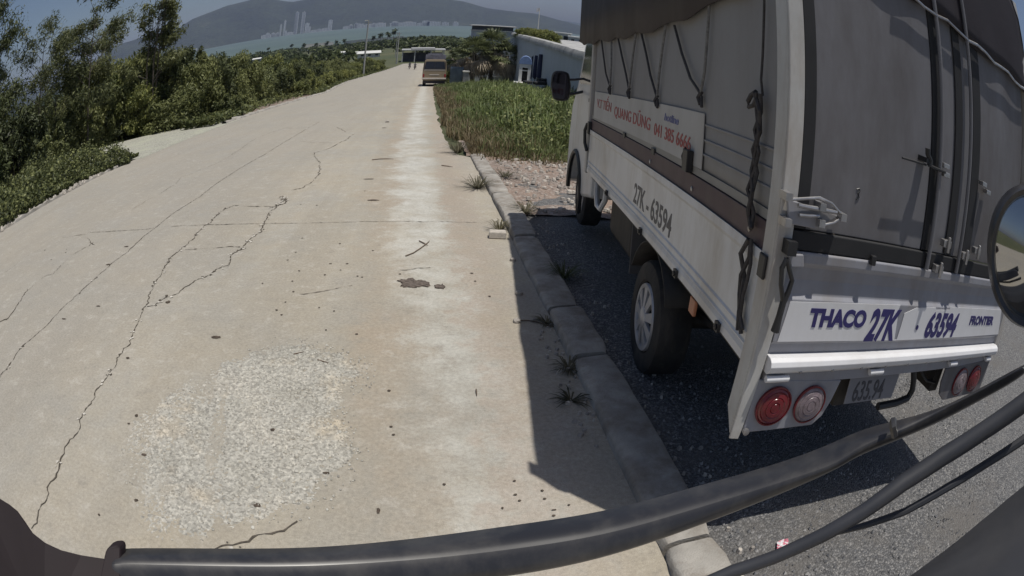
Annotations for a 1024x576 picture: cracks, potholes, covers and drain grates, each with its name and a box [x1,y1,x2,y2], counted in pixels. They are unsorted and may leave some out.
pothole [397,278,430,288]
crack [31,127,352,529]
crack [216,521,298,549]
